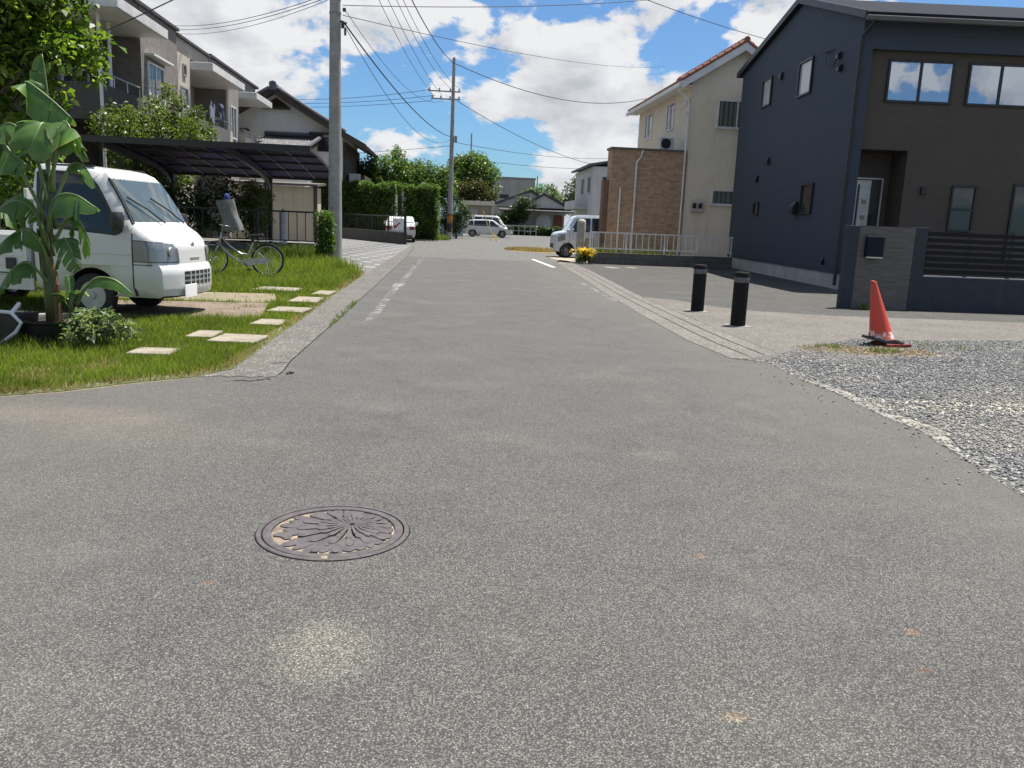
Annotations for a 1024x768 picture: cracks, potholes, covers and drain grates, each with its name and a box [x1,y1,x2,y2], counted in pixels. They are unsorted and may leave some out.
manhole cover [255,505,409,562]
